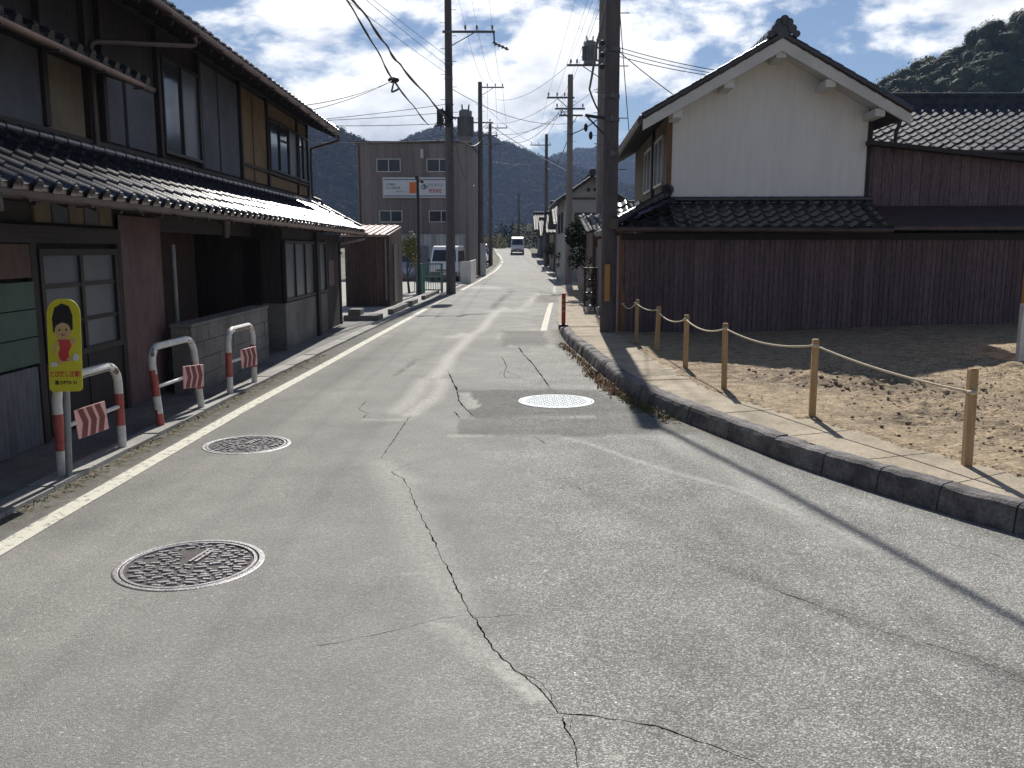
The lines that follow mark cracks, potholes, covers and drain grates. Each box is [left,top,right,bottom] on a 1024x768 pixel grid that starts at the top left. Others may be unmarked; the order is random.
crack [313,403,764,768]
manhole cover [111,540,265,592]
crack [448,372,473,418]
crack [480,348,550,388]
manhole cover [518,394,595,408]
manhole cover [201,435,291,455]
crack [777,590,1021,678]
